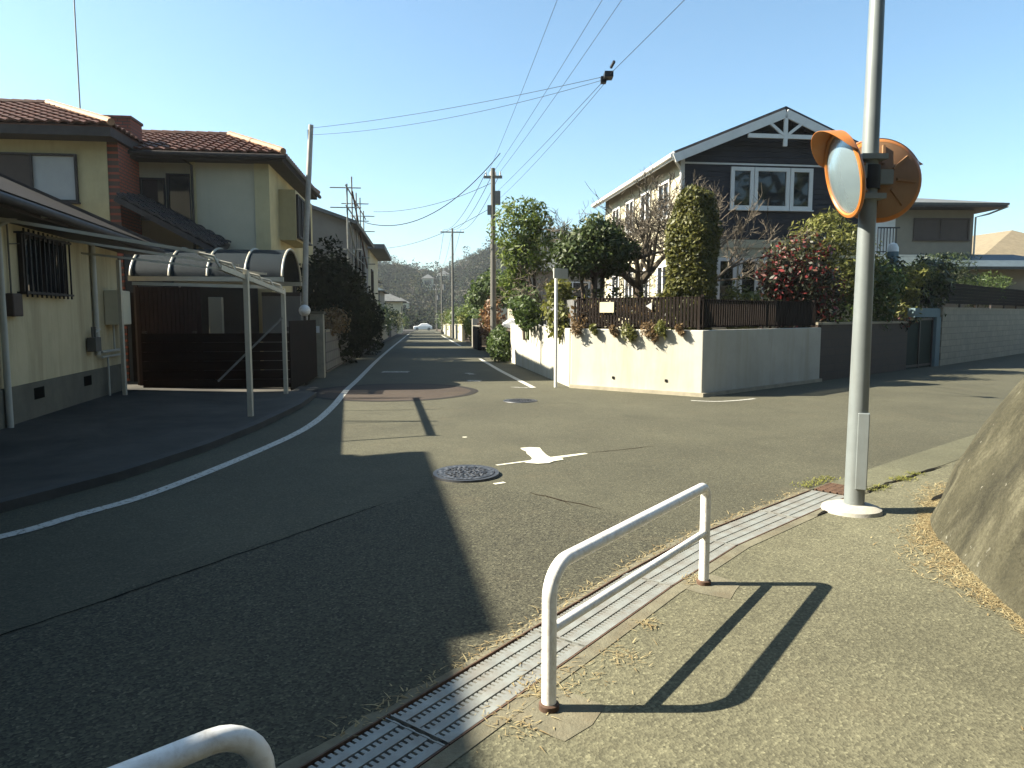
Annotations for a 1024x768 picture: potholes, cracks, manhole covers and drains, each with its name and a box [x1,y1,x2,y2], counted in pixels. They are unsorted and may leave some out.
drain grate [759,489,844,518]
drain grate [387,629,587,746]
drain grate [624,536,737,586]
drain grate [531,573,673,648]
drain grate [710,510,799,546]
manhole cover [433,465,499,483]
drain grate [298,715,449,768]
